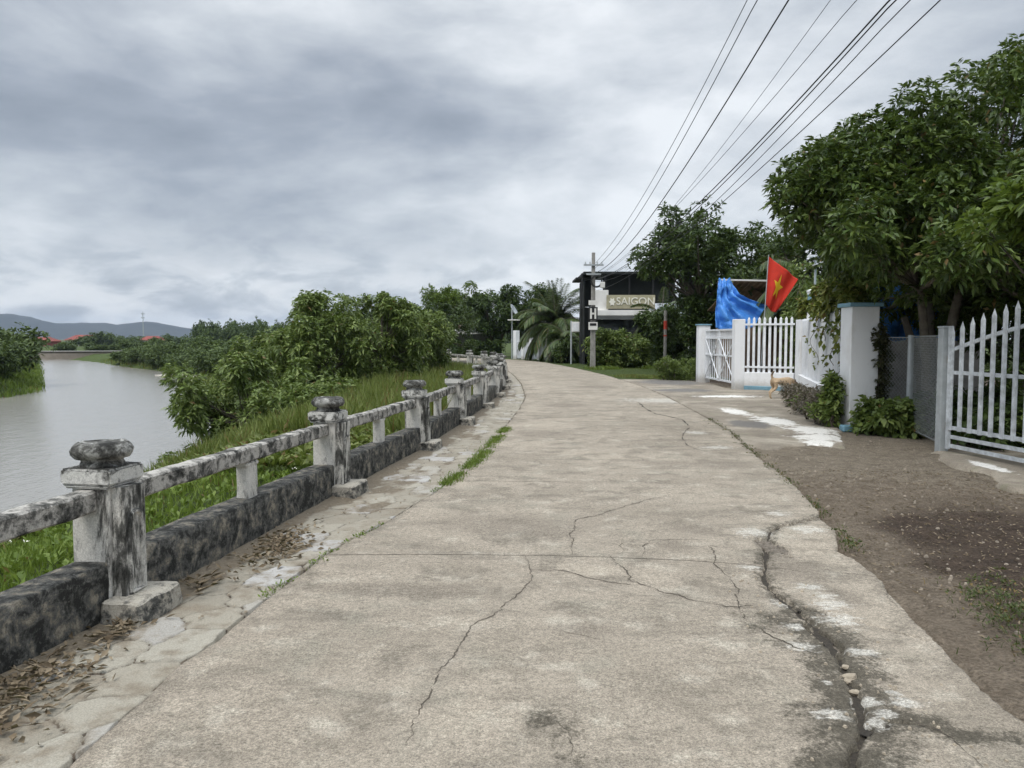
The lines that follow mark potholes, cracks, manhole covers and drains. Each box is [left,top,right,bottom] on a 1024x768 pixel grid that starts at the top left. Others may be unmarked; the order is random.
crack [562,497,982,768]
